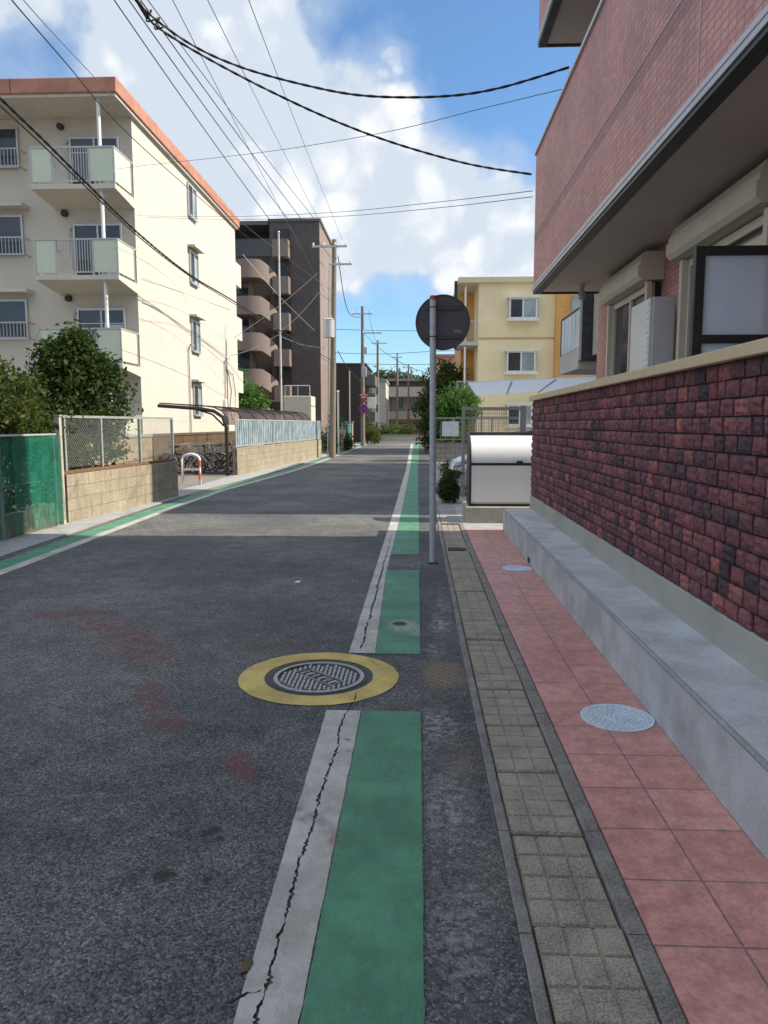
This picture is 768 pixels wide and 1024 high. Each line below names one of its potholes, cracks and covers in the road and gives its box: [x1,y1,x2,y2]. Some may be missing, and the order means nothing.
crack [225,695,356,1024]
utility cover [580,704,655,732]
crack [360,536,392,663]
manhole cover [266,660,372,696]
